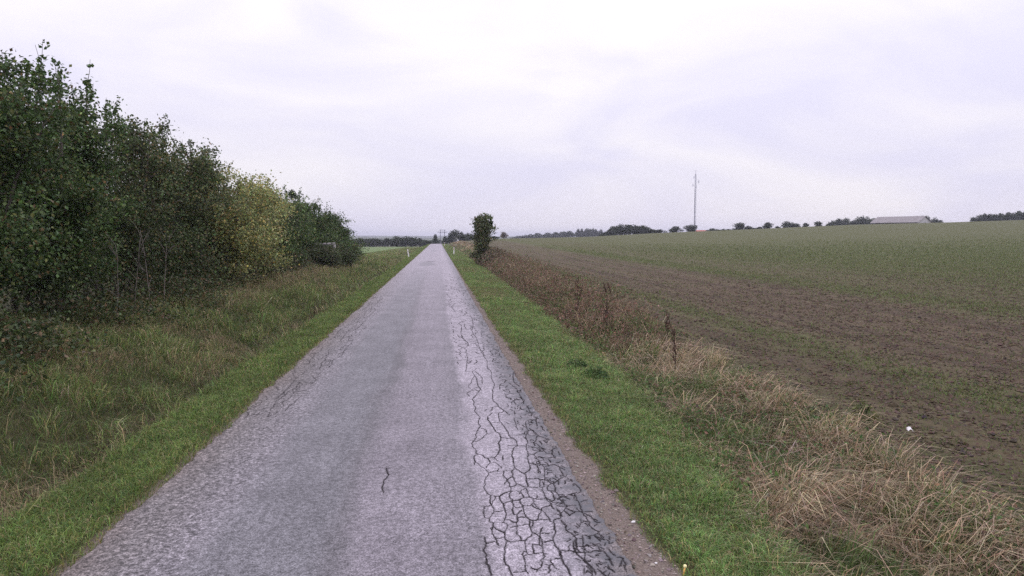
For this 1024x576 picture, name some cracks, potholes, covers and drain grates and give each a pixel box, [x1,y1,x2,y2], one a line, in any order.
crack [446,276,627,576]
crack [244,297,382,418]
